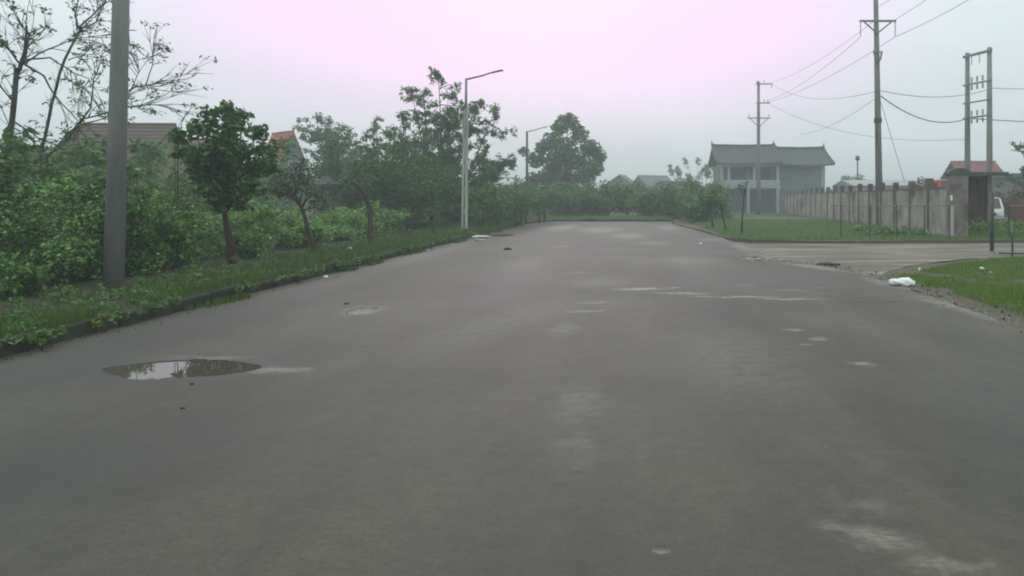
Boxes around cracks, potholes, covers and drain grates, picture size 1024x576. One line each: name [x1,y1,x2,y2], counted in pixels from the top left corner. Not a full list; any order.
pothole [101,359,262,380]
